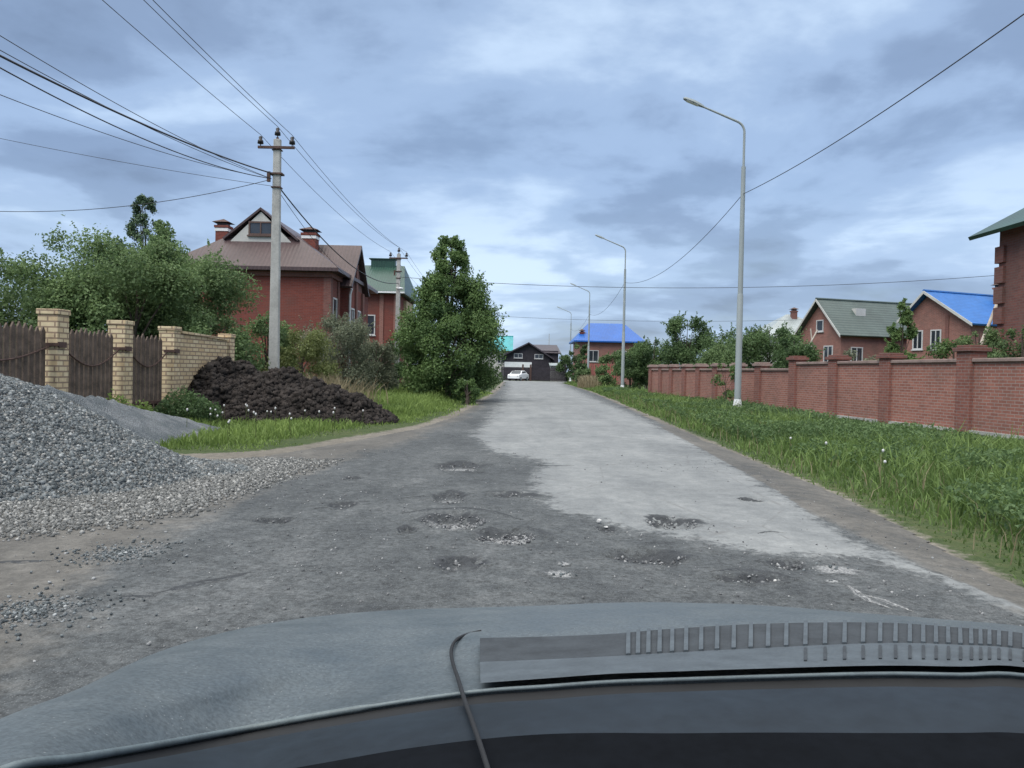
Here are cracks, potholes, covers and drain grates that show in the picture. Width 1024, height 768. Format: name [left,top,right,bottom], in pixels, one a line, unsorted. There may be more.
crack [846,585,914,612]
pothole [323,500,360,510]
pothole [701,572,796,586]
pothole [426,553,499,573]
pothole [425,459,495,474]
pothole [461,525,555,546]
pothole [483,490,554,501]
pothole [637,513,715,533]
crack [97,571,253,601]
pothole [596,547,699,570]
pothole [394,524,419,535]
pothole [424,489,477,505]
